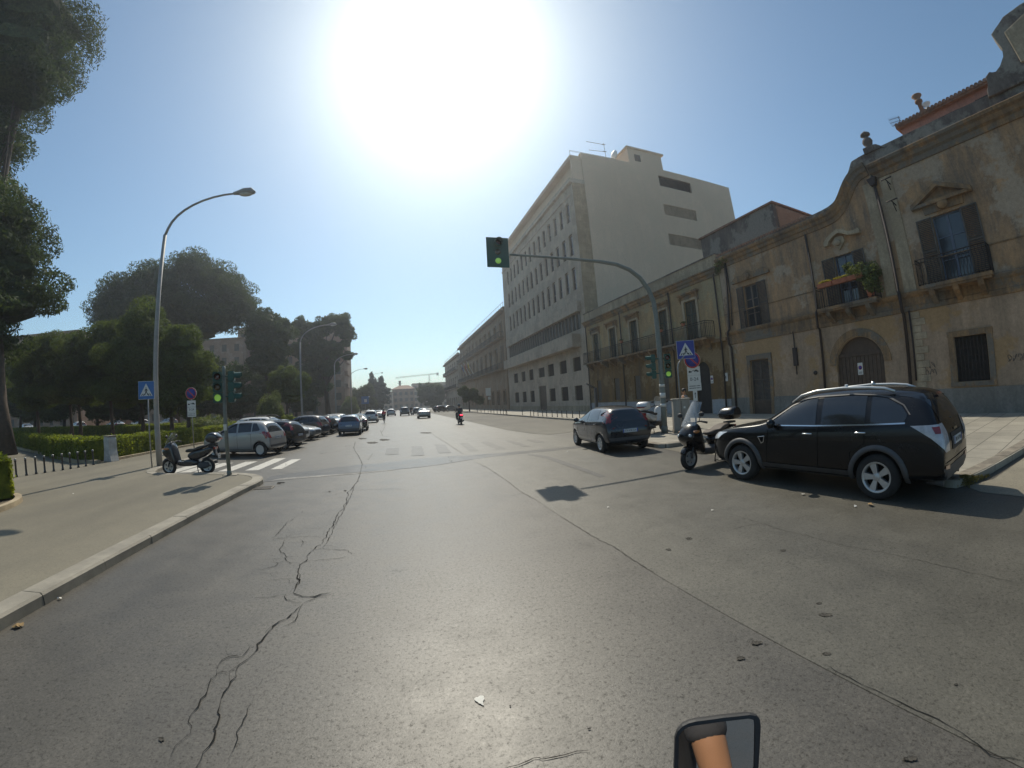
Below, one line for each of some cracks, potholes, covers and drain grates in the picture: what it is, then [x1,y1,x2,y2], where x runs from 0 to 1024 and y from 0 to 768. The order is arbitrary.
crack [507,750,587,768]
crack [170,445,370,767]
